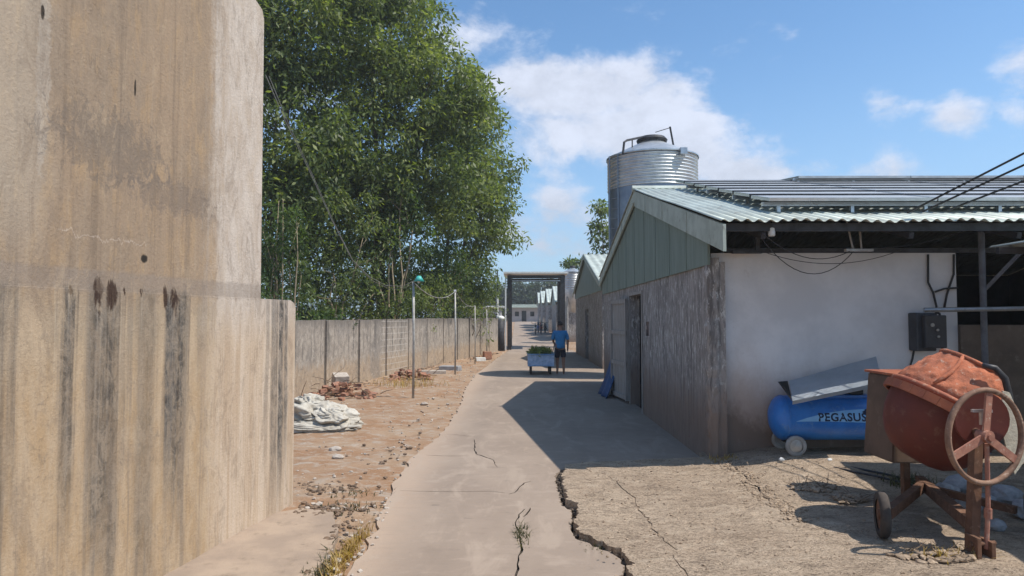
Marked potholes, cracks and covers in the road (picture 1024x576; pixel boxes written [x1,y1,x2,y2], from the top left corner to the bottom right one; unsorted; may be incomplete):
crack [556,472,626,576]
crack [616,481,688,576]
crack [515,482,531,576]
